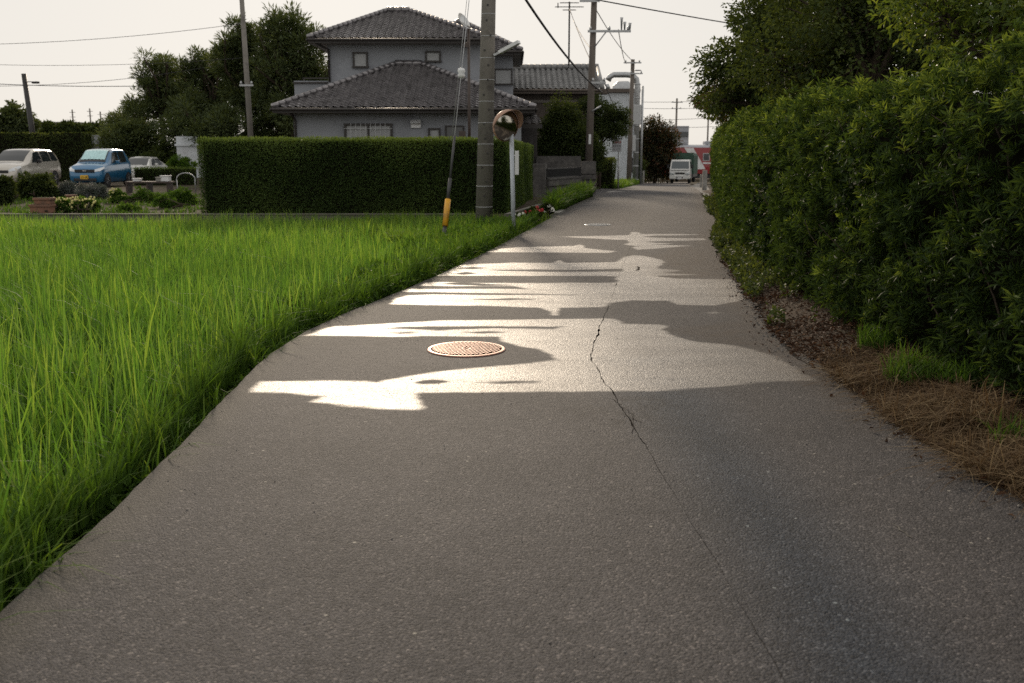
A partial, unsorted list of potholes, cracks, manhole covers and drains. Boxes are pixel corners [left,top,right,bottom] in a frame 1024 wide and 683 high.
manhole cover [427,341,506,358]
crack [590,195,784,680]
